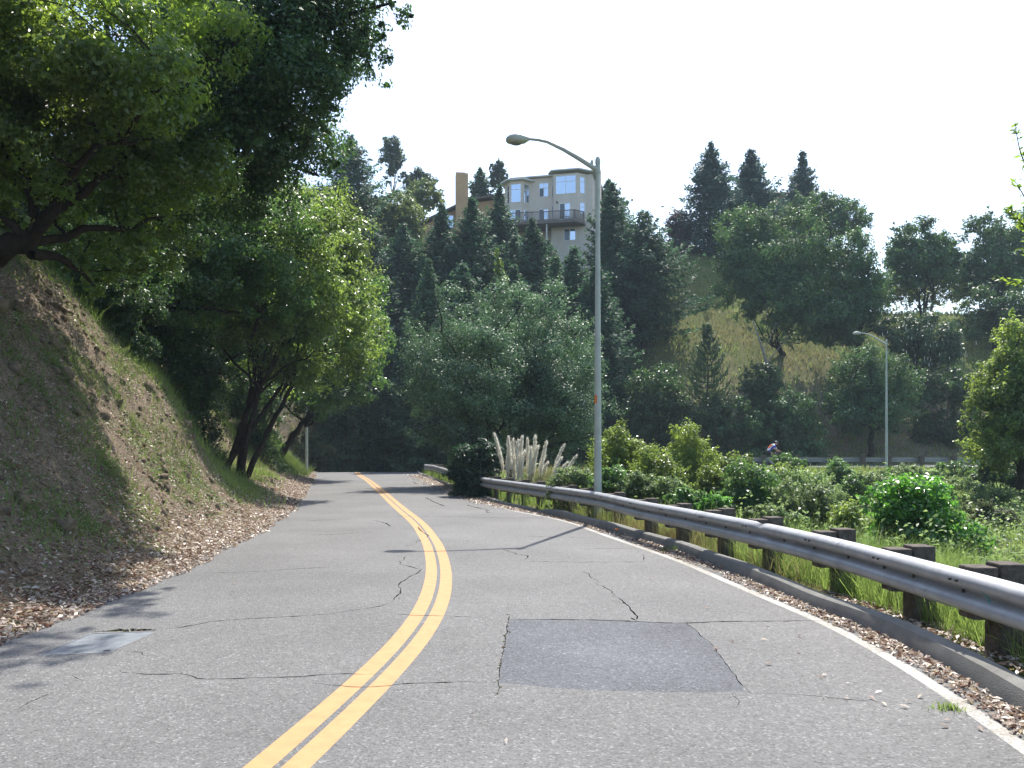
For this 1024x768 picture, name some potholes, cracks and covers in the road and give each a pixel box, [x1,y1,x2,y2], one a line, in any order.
crack [587,573,638,620]
crack [120,671,450,687]
crack [162,482,493,630]
